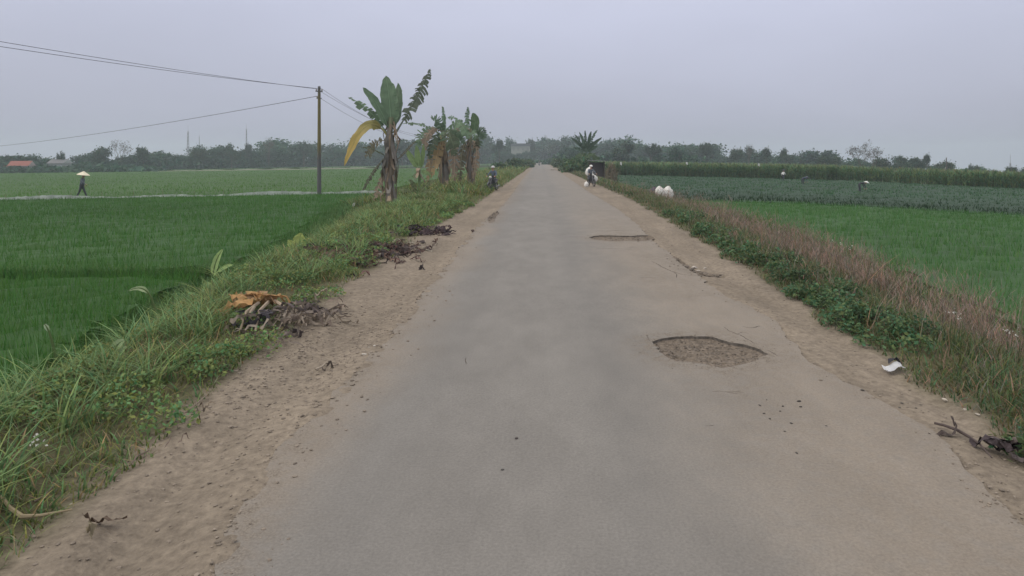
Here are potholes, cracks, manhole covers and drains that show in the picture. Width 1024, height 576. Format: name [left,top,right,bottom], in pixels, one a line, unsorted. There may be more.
pothole [633,332,775,372]
pothole [590,234,654,242]
